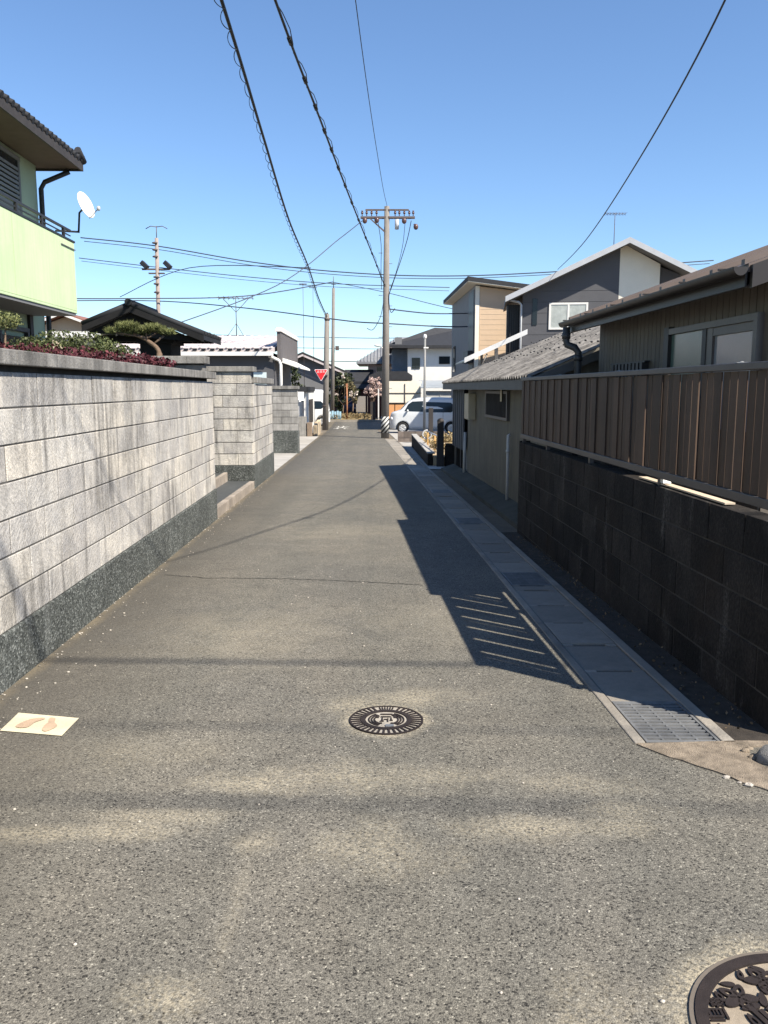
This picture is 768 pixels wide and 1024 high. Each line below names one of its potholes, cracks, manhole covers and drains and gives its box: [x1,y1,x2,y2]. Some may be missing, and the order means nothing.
manhole cover [689,951,768,1024]
drain grate [612,701,720,743]
manhole cover [349,706,423,735]
